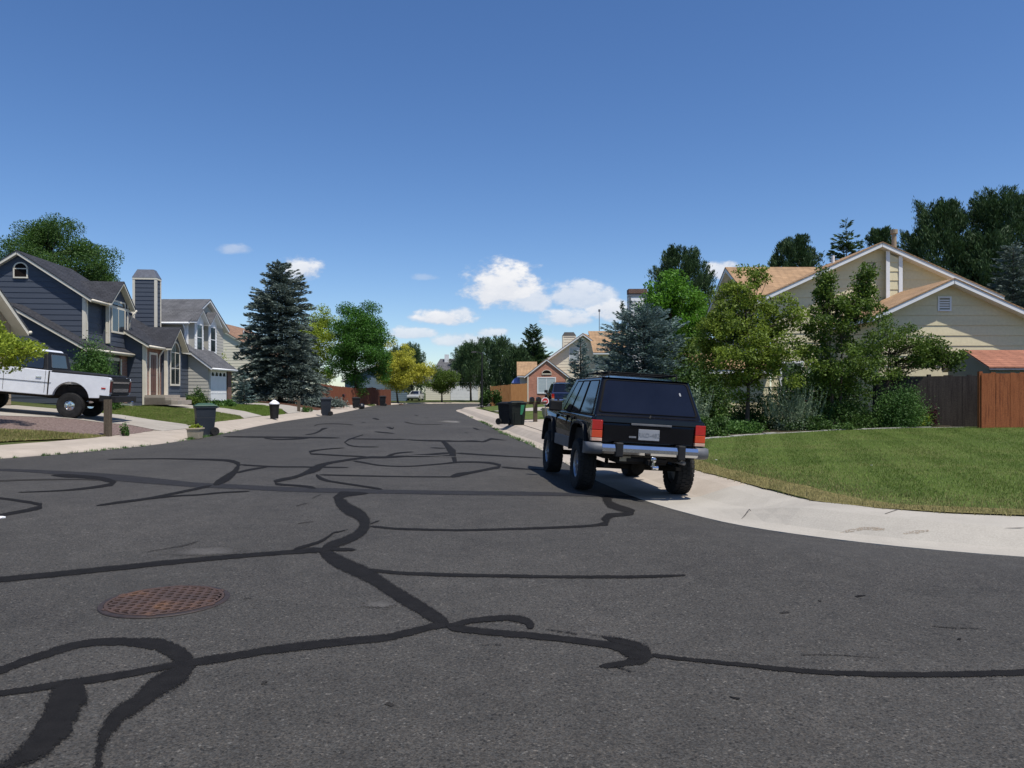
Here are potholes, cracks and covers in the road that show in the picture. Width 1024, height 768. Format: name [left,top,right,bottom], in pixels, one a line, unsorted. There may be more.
manhole cover [97,585,230,618]
